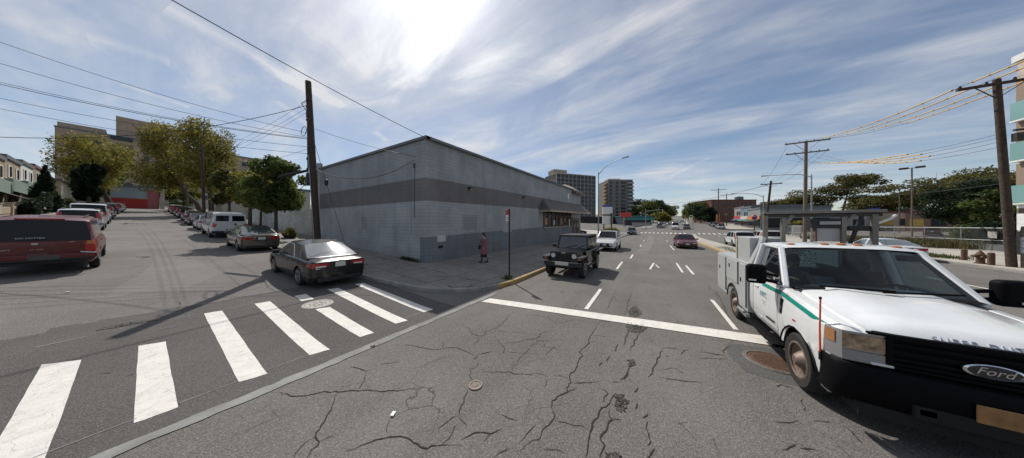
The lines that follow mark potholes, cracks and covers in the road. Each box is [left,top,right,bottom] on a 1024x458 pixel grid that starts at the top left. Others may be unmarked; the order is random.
pothole [613,394,630,413]
manhole cover [742,350,791,375]
manhole cover [469,380,482,390]
manhole cover [301,299,334,309]
pothole [626,322,647,333]
crack [273,292,729,458]
